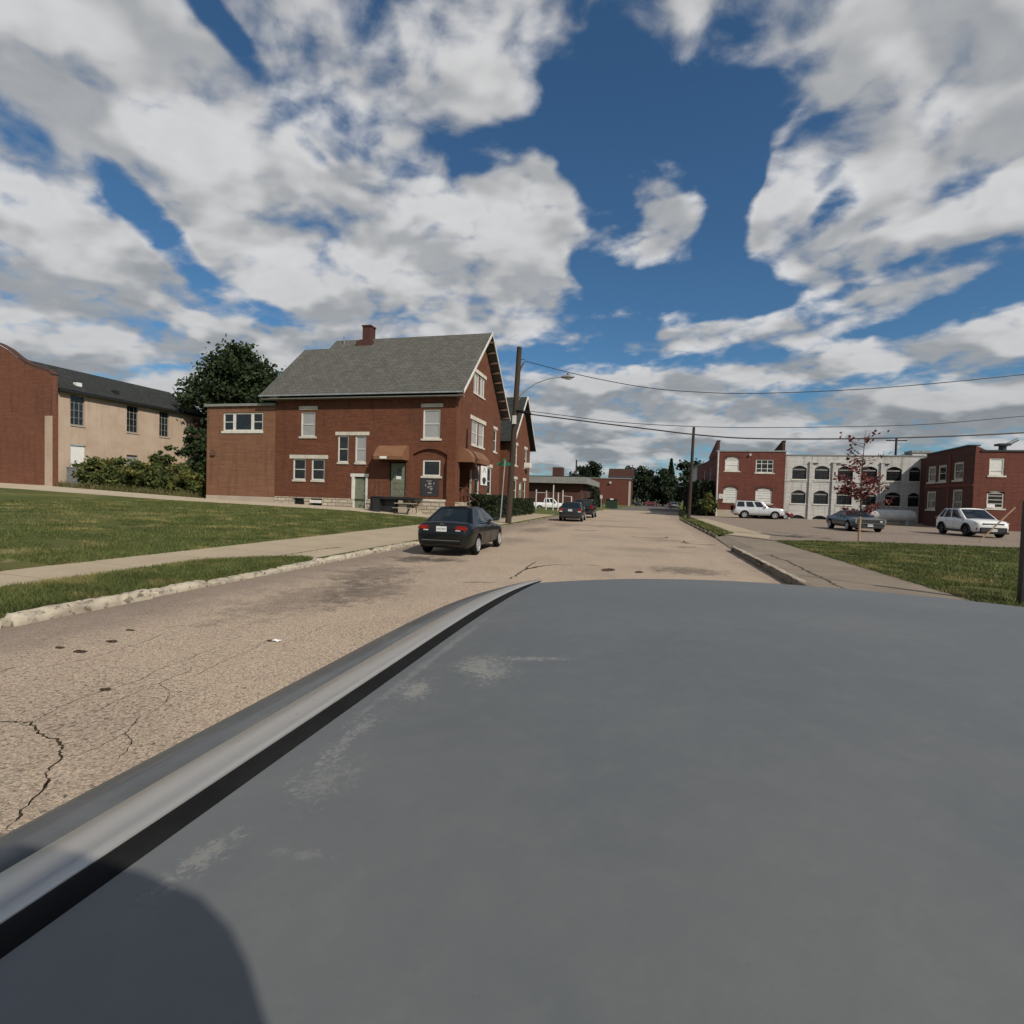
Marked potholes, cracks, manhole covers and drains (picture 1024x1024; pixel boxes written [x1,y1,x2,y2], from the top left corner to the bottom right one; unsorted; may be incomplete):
crack [464,563,558,583]
crack [0,626,324,829]
